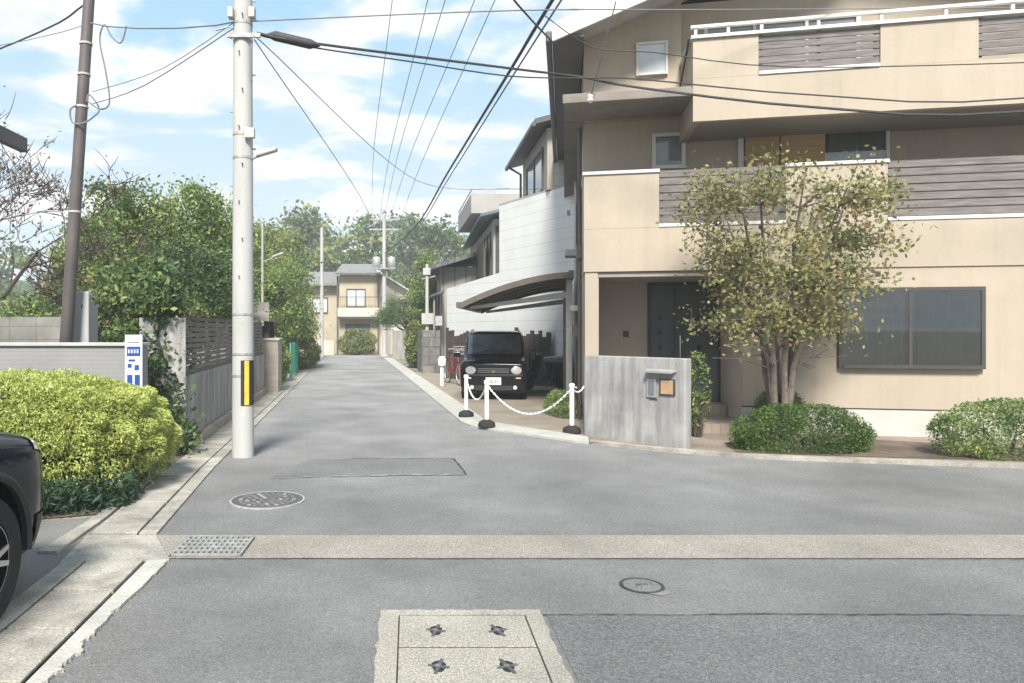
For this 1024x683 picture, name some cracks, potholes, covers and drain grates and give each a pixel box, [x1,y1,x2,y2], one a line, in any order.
manhole cover [229,491,305,510]
drain grate [169,535,255,557]
utility cover [619,578,669,596]
